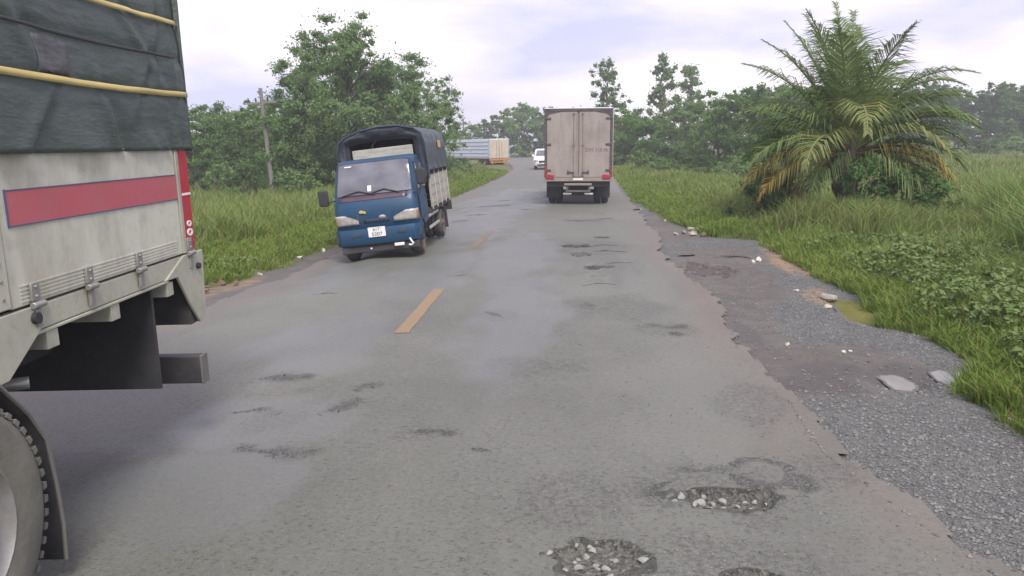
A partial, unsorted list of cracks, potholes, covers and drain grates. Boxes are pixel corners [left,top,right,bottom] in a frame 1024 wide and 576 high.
pothole [654,486,811,515]
pothole [539,537,658,576]
pothole [719,566,783,576]
